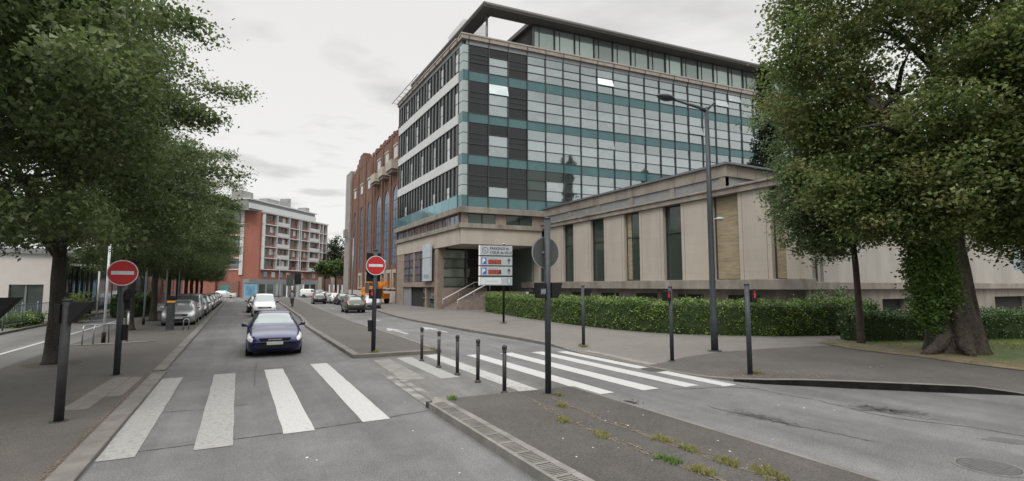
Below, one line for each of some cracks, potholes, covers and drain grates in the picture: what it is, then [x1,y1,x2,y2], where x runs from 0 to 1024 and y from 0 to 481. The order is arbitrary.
manhole cover [950,457,1024,477]
crack [709,406,876,442]
